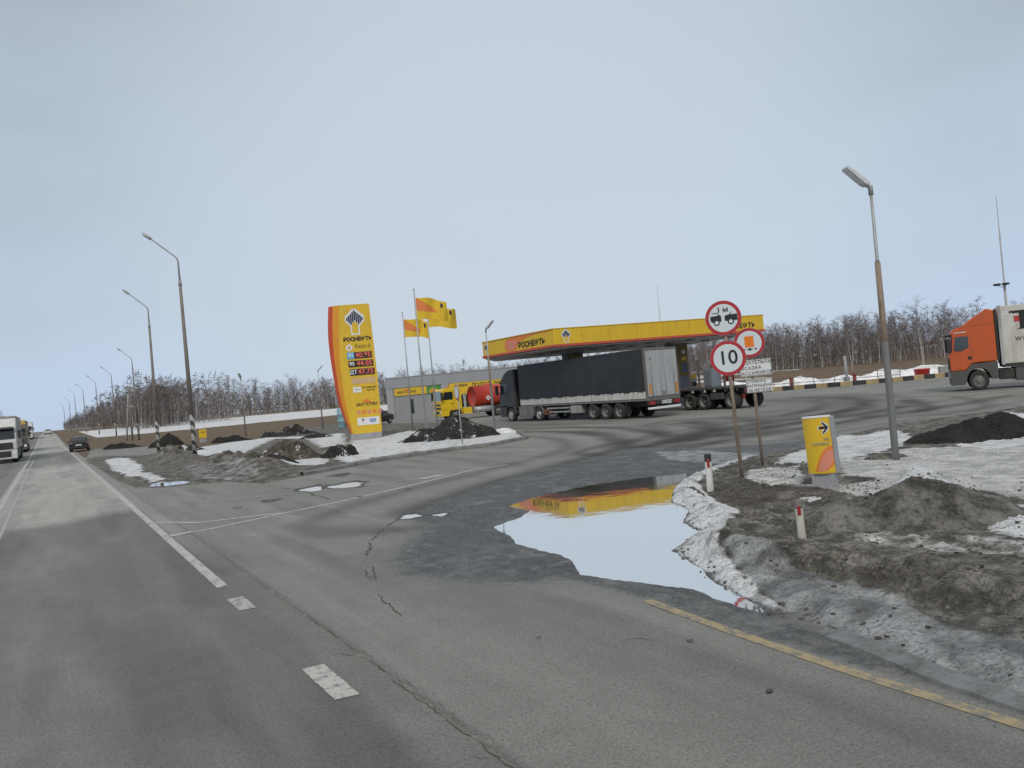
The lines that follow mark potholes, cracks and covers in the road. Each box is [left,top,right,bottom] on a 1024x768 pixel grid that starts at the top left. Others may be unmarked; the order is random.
crack [364,520,402,616]
pothole [293,484,327,492]
crack [372,662,514,768]
pothole [324,480,369,489]
